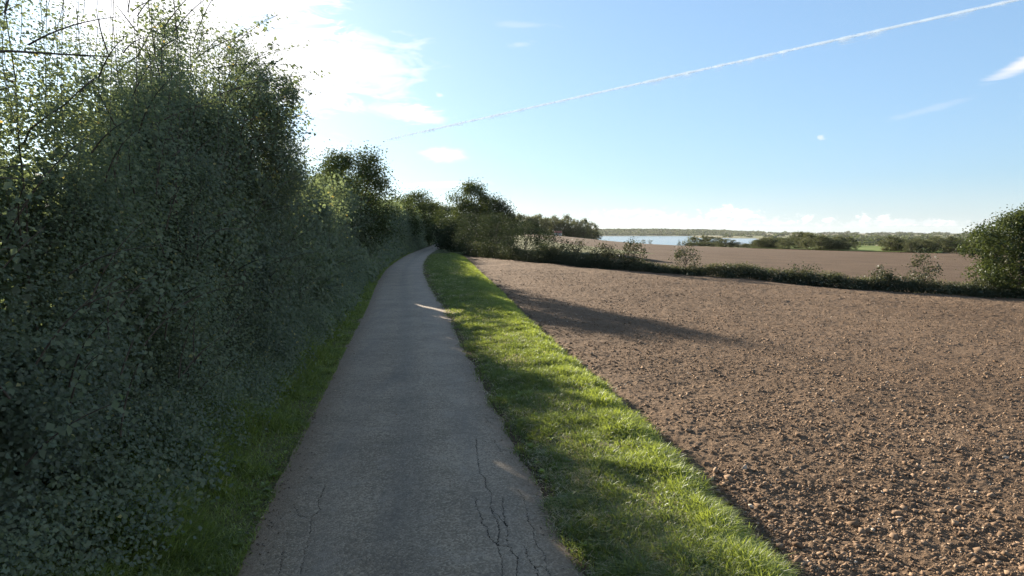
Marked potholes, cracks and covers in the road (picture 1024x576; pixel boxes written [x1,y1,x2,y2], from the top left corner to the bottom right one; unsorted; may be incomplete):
crack [475,440,549,576]
